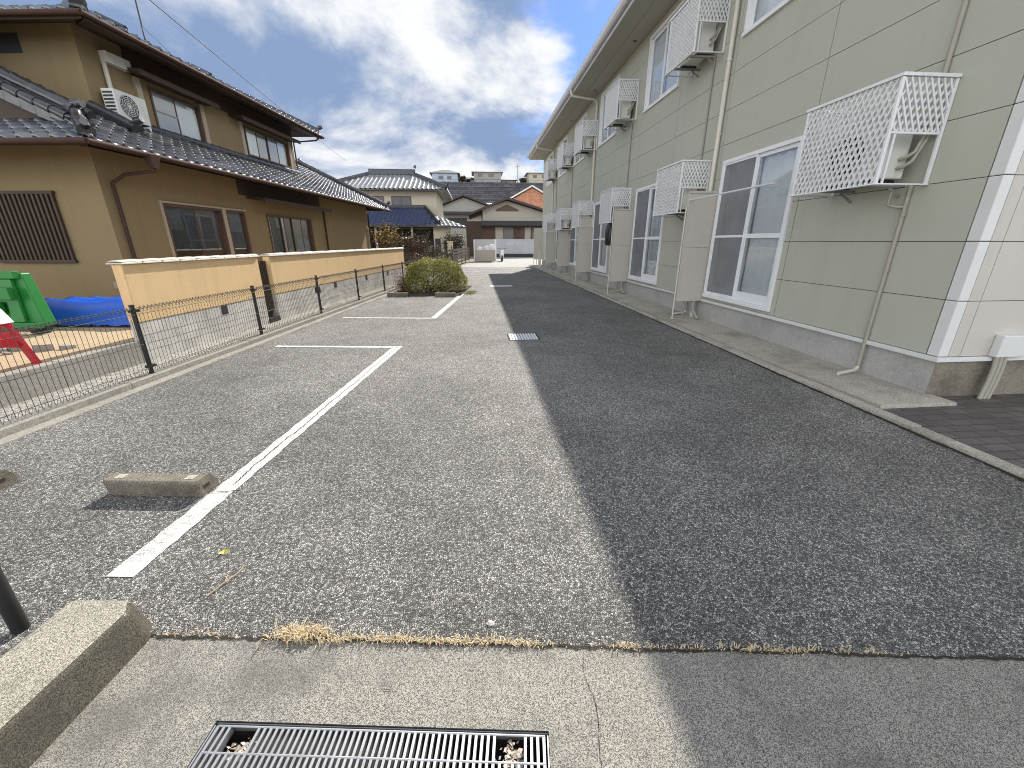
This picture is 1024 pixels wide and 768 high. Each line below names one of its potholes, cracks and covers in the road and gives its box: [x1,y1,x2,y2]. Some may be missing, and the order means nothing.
drain grate [507,333,541,341]
crack [583,653,602,768]
drain grate [188,722,550,768]
